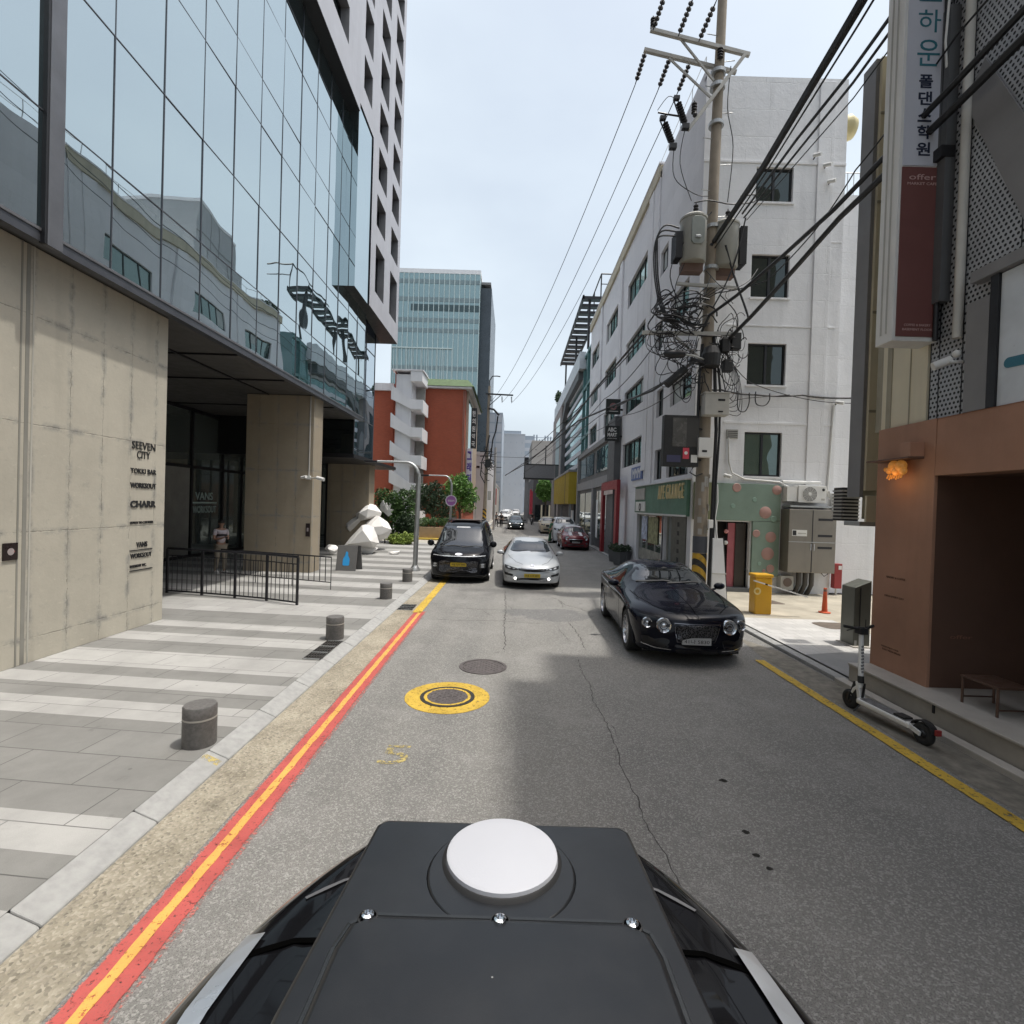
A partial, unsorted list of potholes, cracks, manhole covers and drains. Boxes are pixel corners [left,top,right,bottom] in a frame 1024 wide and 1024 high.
crack [550,596,681,886]
manhole cover [404,682,490,714]
manhole cover [459,659,507,675]
drain grate [302,640,343,660]
